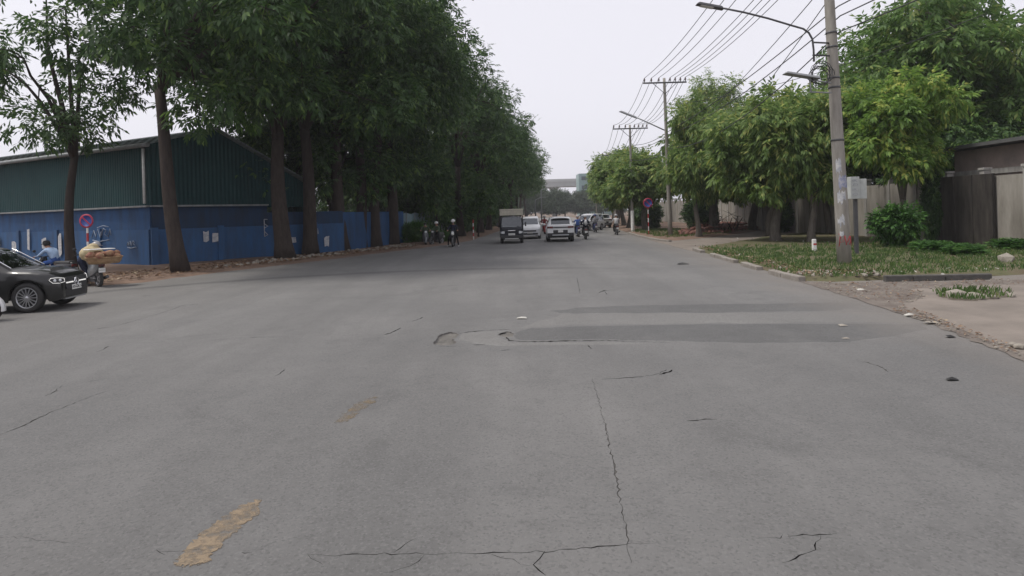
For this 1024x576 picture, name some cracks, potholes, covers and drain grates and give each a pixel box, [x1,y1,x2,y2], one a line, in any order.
crack [2,378,109,434]
pothole [433,332,459,345]
crack [780,533,837,563]
crack [308,538,649,575]
